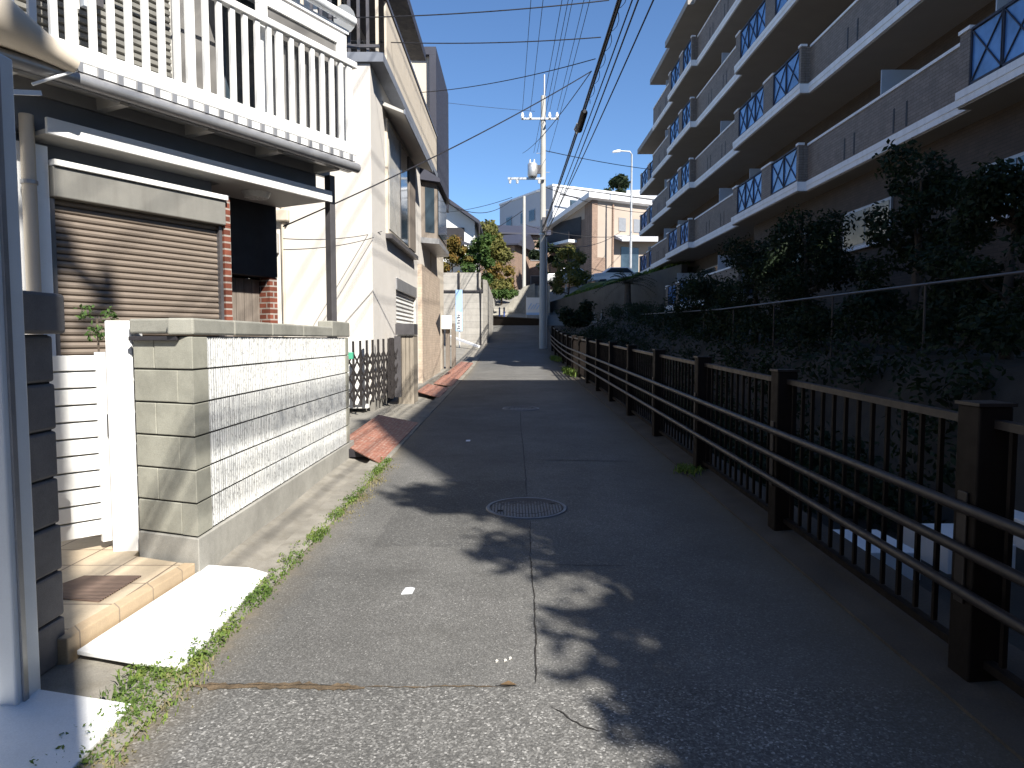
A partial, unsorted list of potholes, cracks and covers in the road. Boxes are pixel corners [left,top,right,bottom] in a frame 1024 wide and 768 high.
manhole cover [486,497,567,519]
crack [552,707,599,731]
